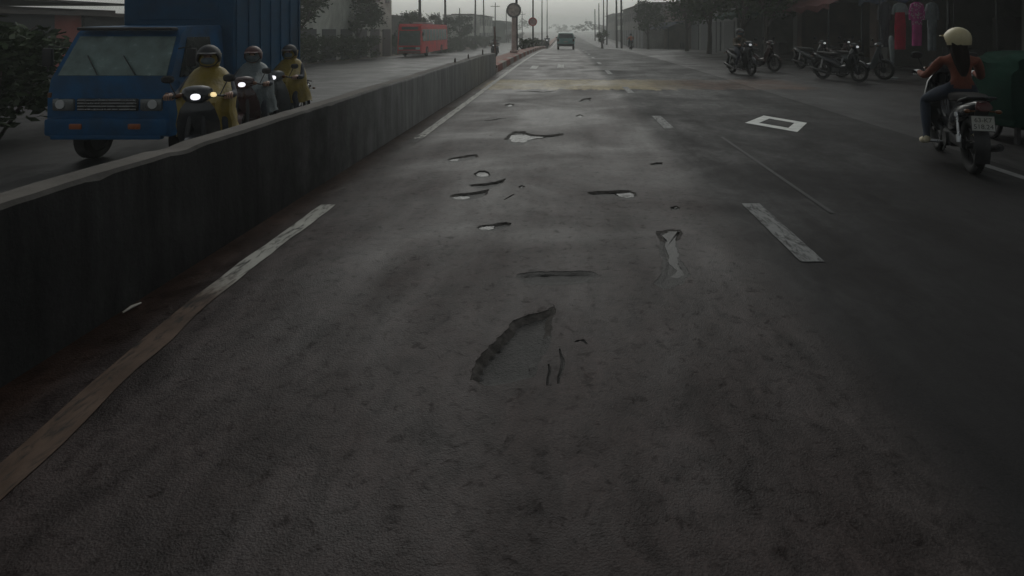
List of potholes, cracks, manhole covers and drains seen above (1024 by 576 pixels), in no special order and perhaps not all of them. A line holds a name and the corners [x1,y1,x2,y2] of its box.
pothole [447,154,478,162]
pothole [470,305,556,386]
pothole [449,189,489,201]
pothole [587,190,637,199]
pothole [504,131,564,145]
pothole [653,229,691,290]
pothole [476,222,511,231]
pothole [469,179,506,190]
pothole [516,271,598,286]
crack [546,339,588,385]
